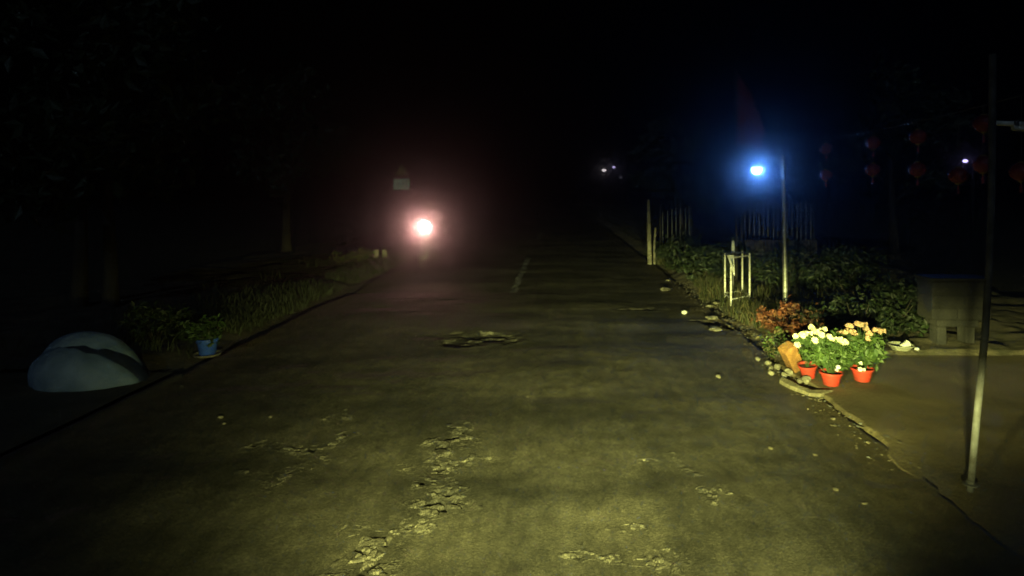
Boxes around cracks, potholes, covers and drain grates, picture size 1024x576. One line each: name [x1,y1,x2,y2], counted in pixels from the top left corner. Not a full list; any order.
pothole [424,330,527,349]
